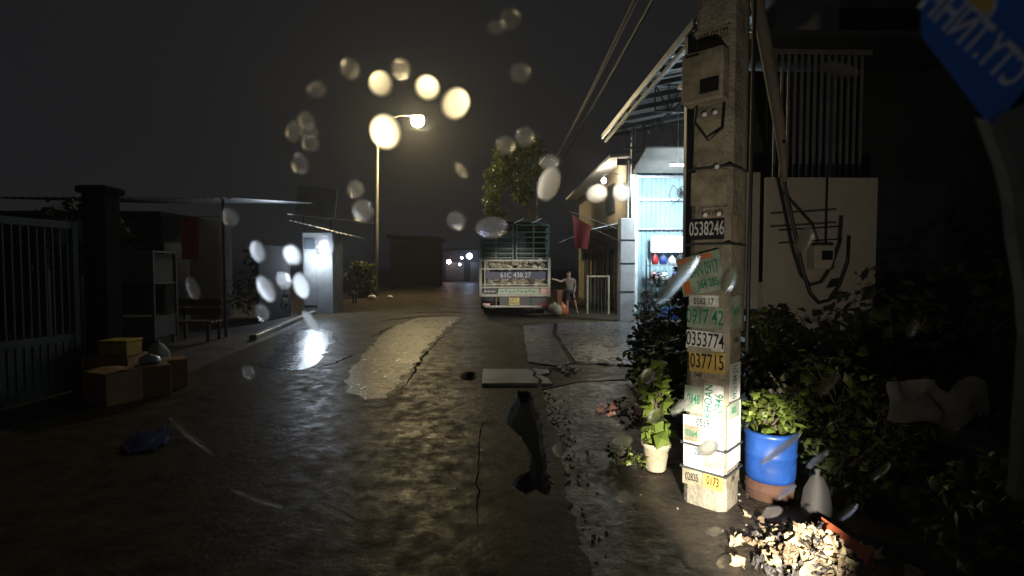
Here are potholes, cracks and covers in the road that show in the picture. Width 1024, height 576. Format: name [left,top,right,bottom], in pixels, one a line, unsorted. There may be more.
crack [552,324,576,363]
crack [475,423,484,528]
pothole [459,371,478,381]
manhole cover [482,368,553,387]
crack [309,312,464,404]
pothole [505,390,555,497]
